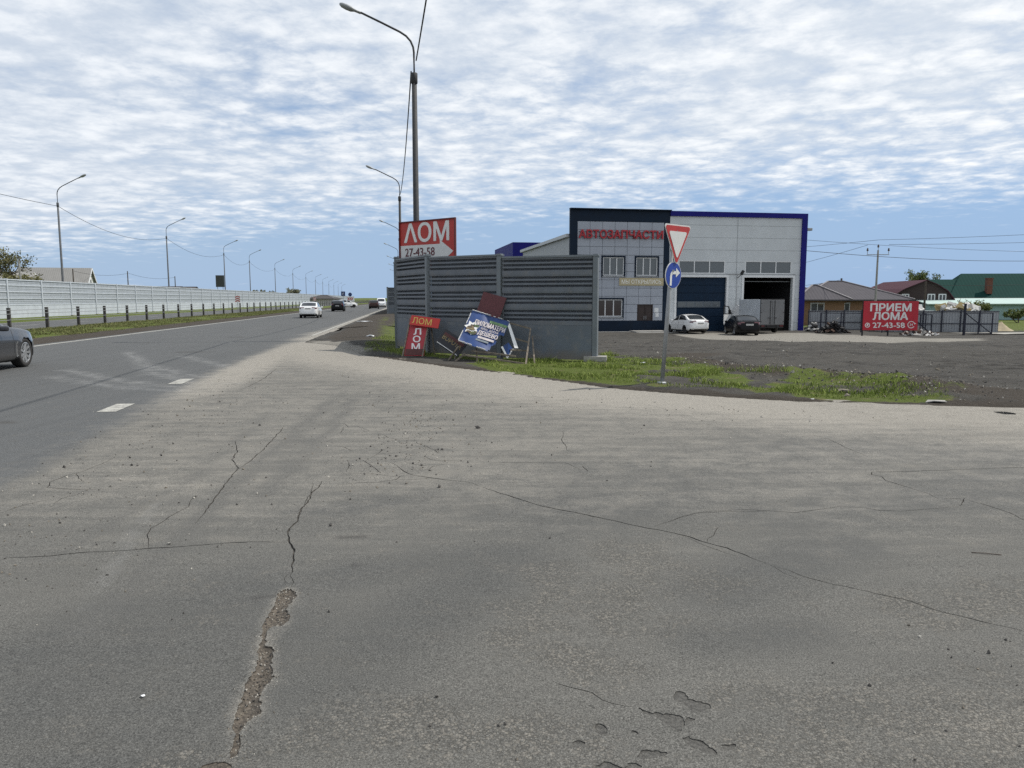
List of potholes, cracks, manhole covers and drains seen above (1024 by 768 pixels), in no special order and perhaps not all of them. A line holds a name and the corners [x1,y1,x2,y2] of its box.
crack [15,428,283,558]
pothole [230,589,297,758]
pothole [595,723,607,734]
pothole [682,736,717,755]
pothole [637,750,667,759]
pothole [673,691,711,713]
crack [284,481,322,585]
pothole [639,708,685,732]
crack [340,423,1024,631]
